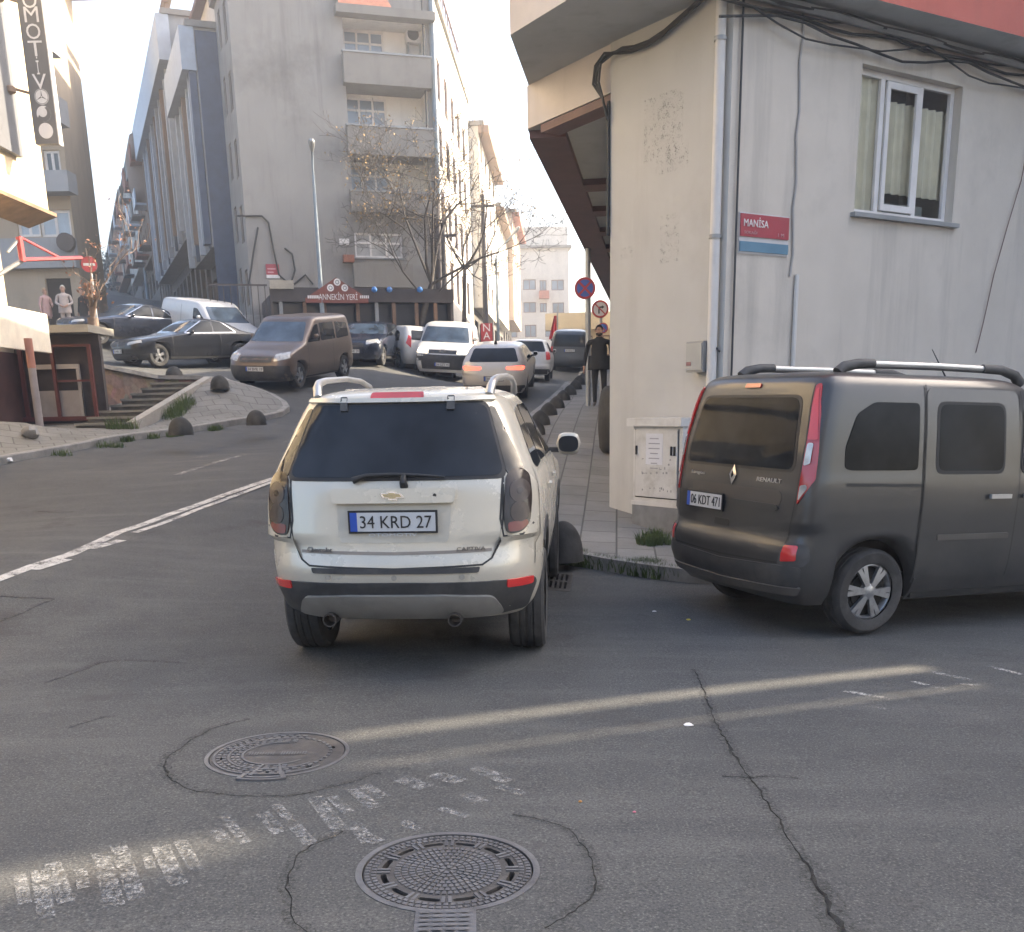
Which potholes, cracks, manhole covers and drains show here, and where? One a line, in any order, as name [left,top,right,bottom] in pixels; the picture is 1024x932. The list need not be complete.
manhole cover [204,732,349,781]
manhole cover [355,832,540,932]
crack [162,719,376,797]
drain grate [548,571,574,592]
crack [280,814,602,932]
crack [695,670,850,932]
